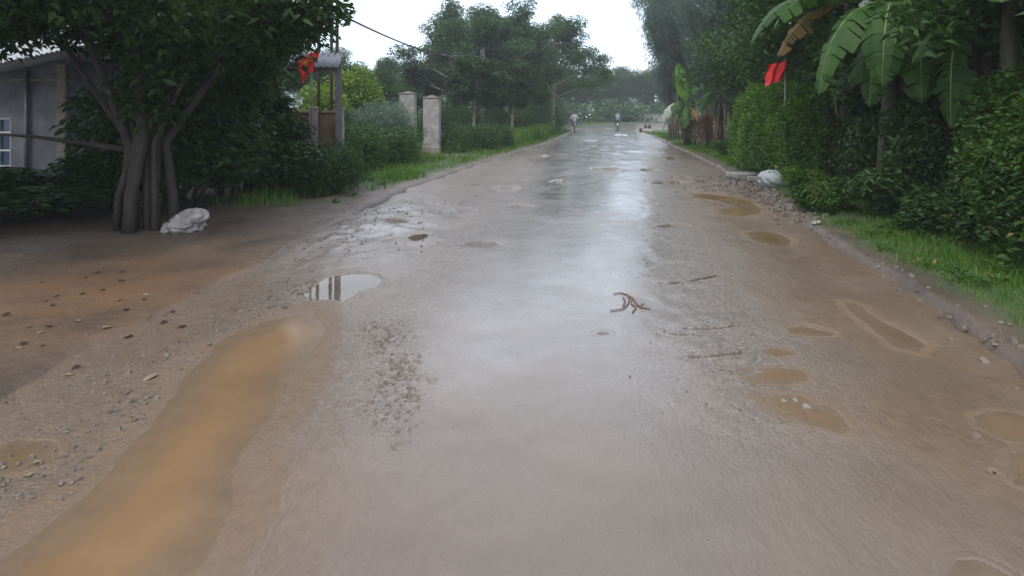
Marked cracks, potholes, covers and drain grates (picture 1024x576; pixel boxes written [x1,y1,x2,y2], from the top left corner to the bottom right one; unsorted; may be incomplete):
pothole [781,323,843,338]
pothole [755,345,800,360]
pothole [833,299,942,358]
crack [657,322,765,376]
pothole [962,407,1024,446]
pothole [403,233,434,242]
pothole [746,389,862,439]
pothole [734,230,802,247]
crack [652,274,726,286]
pothole [679,191,780,218]
pothole [0,299,355,576]
